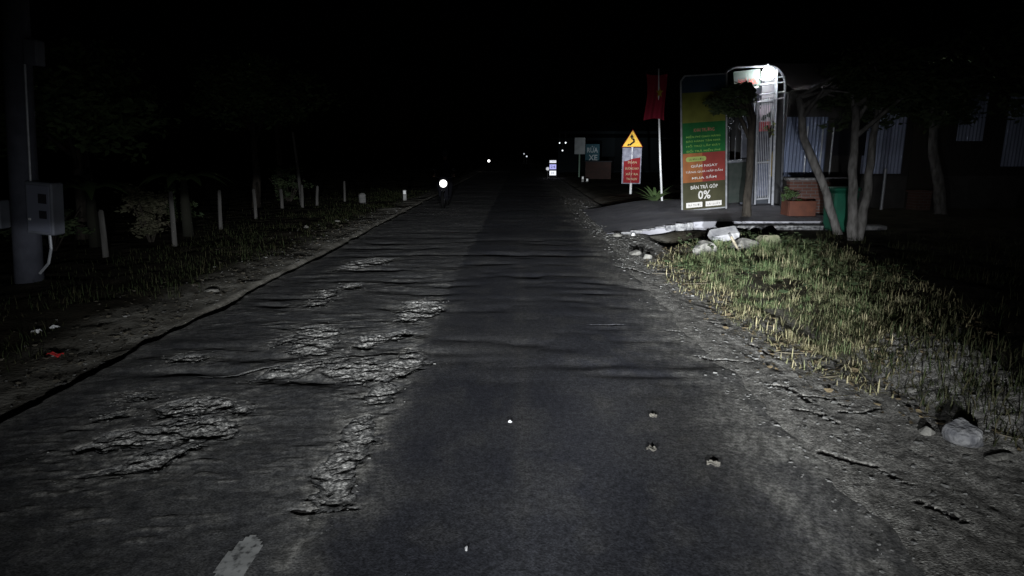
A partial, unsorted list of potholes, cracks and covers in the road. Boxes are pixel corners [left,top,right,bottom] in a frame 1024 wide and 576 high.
pothole [72,415,239,455]
pothole [395,300,446,323]
pothole [363,377,398,405]
crack [819,451,906,483]
pothole [156,410,202,429]
pothole [317,290,338,299]
crack [916,500,968,523]
crack [697,345,785,363]
pothole [250,355,350,382]
